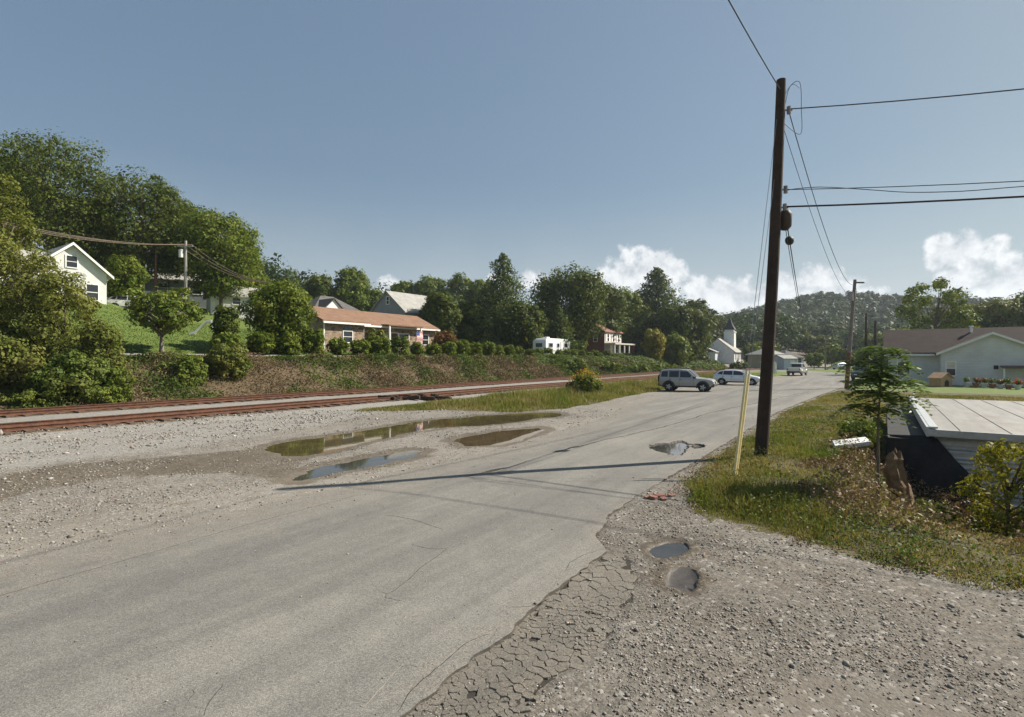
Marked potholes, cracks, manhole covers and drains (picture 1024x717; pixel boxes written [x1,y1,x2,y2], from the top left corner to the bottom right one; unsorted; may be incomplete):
pothole [648,440,691,456]
pothole [653,562,713,599]
crack [421,552,638,716]
pothole [636,538,701,563]
crack [362,634,488,711]
